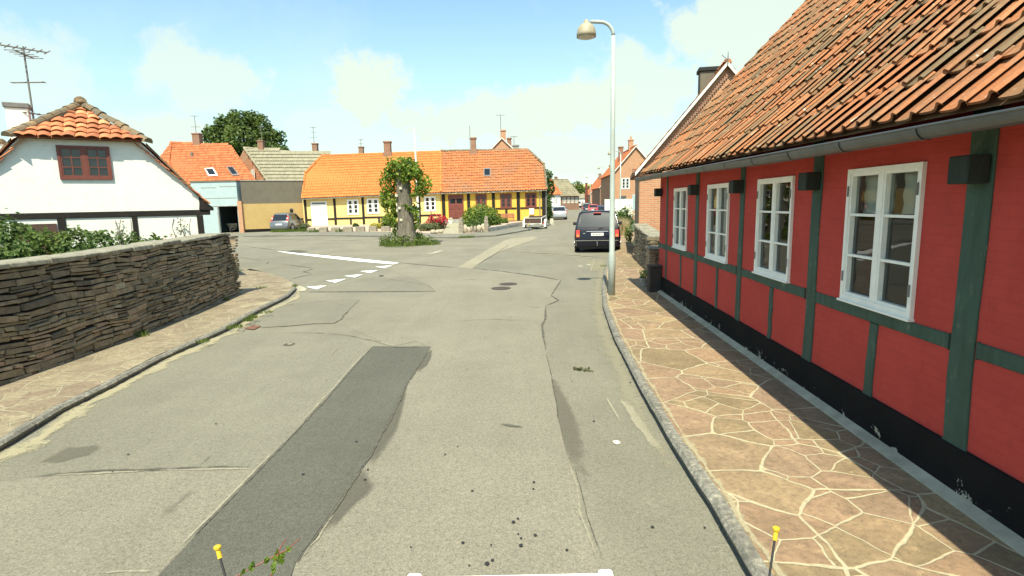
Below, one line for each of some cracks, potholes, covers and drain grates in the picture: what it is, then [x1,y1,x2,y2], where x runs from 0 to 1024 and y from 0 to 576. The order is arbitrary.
crack [33,239,446,573]
